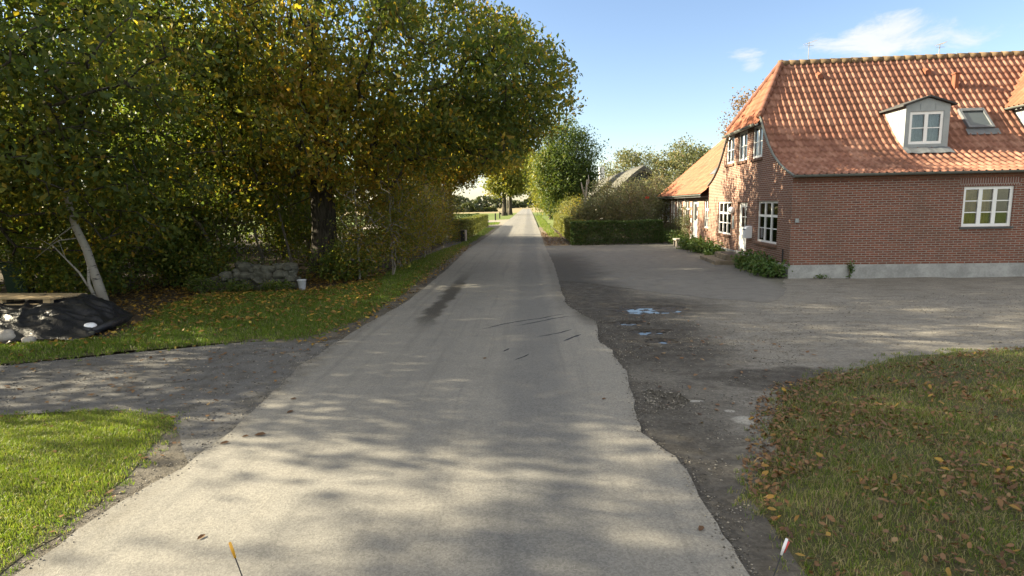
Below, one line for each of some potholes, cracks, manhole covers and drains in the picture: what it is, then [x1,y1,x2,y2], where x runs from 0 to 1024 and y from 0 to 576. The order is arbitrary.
crack [484,314,581,341]
pothole [642,389,690,410]
pothole [605,305,690,314]
